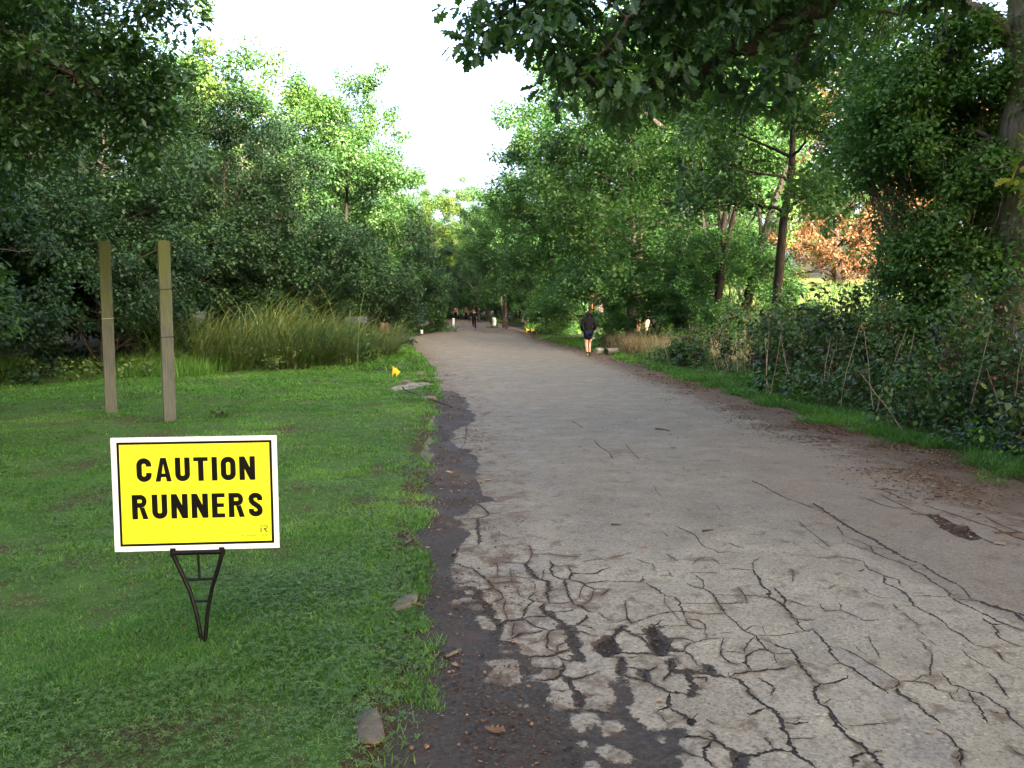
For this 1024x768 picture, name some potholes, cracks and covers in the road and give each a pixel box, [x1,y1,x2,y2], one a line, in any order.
pothole [648,626,666,653]
crack [455,481,1024,768]
pothole [593,637,617,657]
pothole [927,514,982,541]
